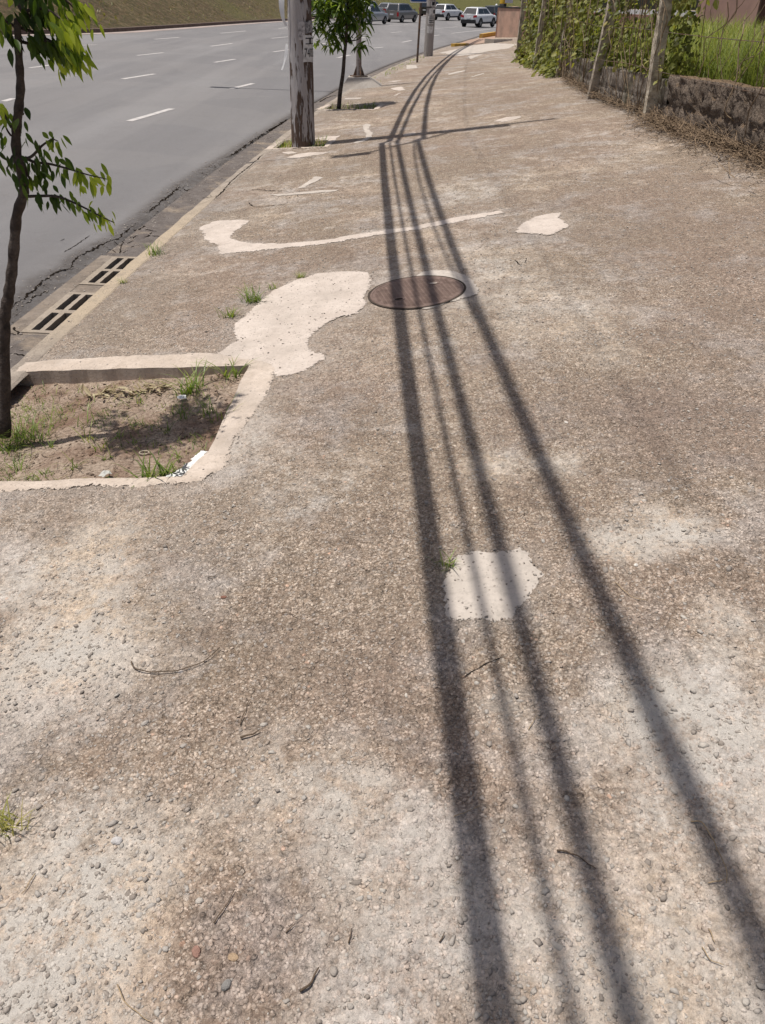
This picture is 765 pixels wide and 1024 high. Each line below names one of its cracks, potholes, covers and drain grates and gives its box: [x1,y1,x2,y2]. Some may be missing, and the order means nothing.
crack [13,187,218,307]
drain grate [79,257,136,286]
manhole cover [368,275,466,309]
drain grate [21,292,95,334]
